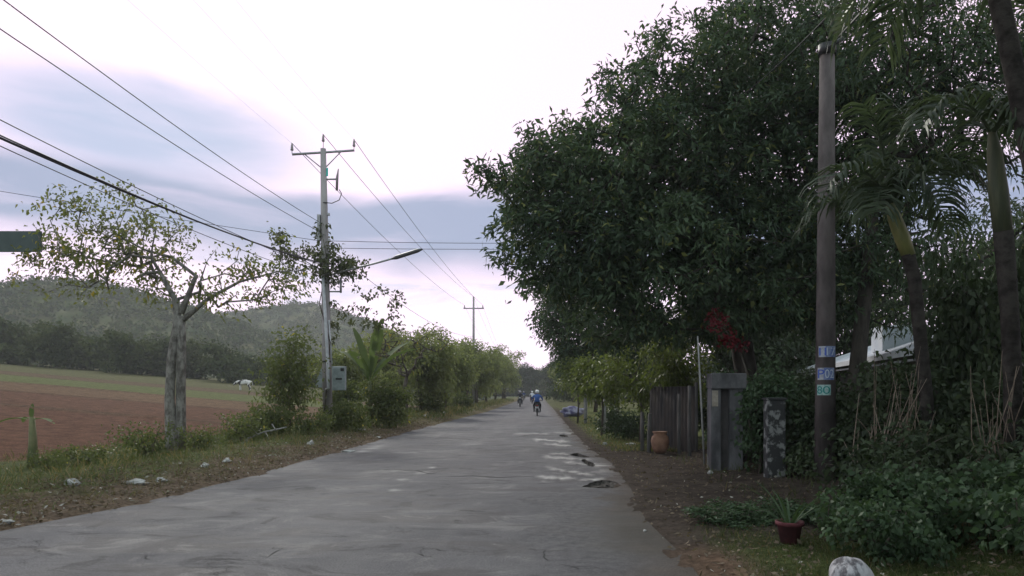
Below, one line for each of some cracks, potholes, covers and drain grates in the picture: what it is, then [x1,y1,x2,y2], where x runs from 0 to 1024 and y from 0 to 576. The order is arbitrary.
pothole [583,480,618,488]
